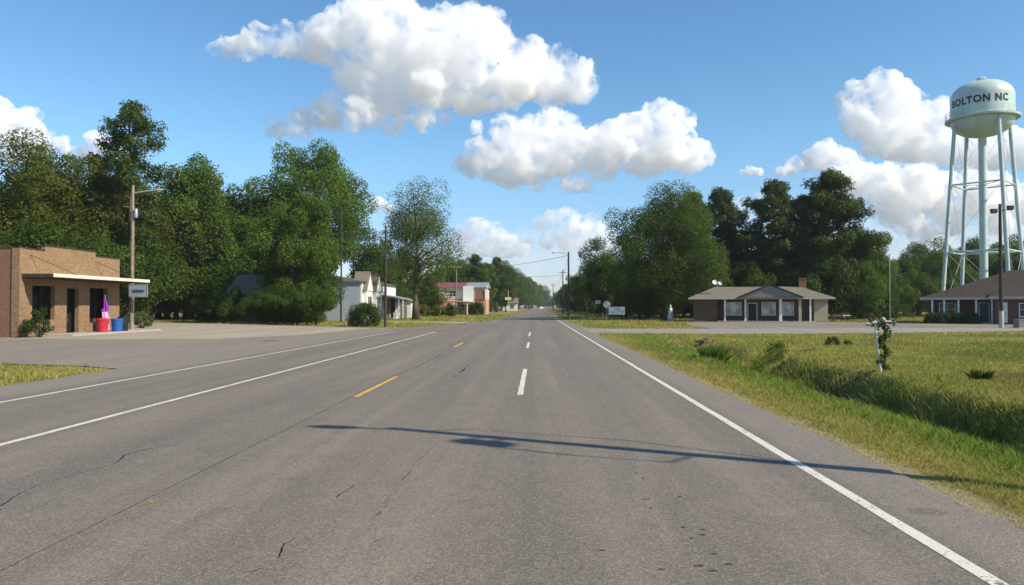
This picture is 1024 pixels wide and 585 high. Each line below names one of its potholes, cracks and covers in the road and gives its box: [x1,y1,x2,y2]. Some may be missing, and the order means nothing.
crack [0,440,201,510]
